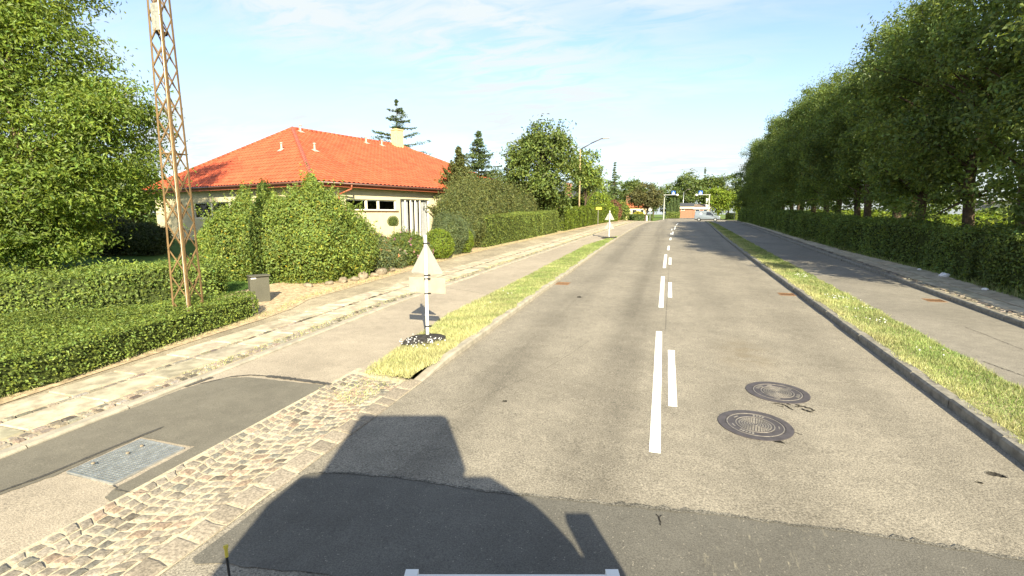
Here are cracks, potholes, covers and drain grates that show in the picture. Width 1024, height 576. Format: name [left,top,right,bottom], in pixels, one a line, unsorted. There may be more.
manhole cover [746,382,811,404]
manhole cover [718,410,794,441]
